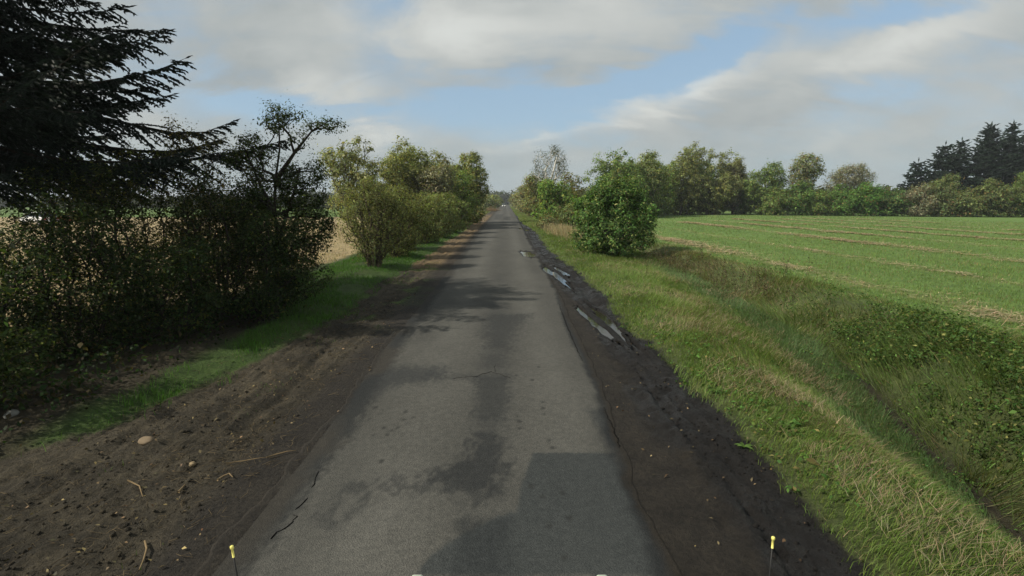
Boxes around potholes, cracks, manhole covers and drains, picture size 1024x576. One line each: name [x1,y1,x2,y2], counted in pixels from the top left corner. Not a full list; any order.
pothole [541,265,575,293]
pothole [585,302,631,348]
pothole [519,250,540,258]
crack [270,471,319,539]
